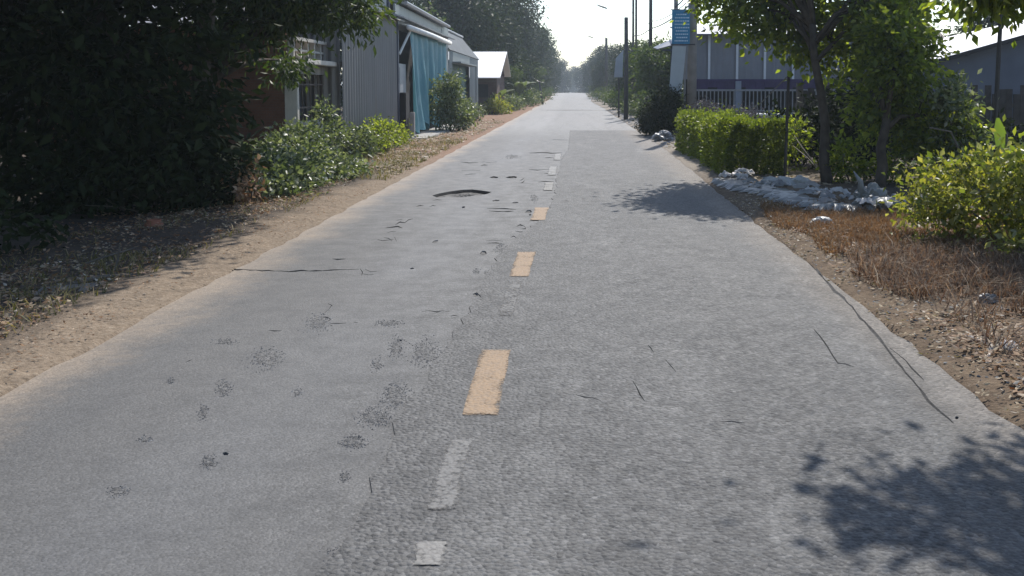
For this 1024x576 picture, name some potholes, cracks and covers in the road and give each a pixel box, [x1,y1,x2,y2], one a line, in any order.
crack [783,242,953,423]
pothole [432,189,490,198]
crack [381,199,438,241]
crack [232,259,377,275]
